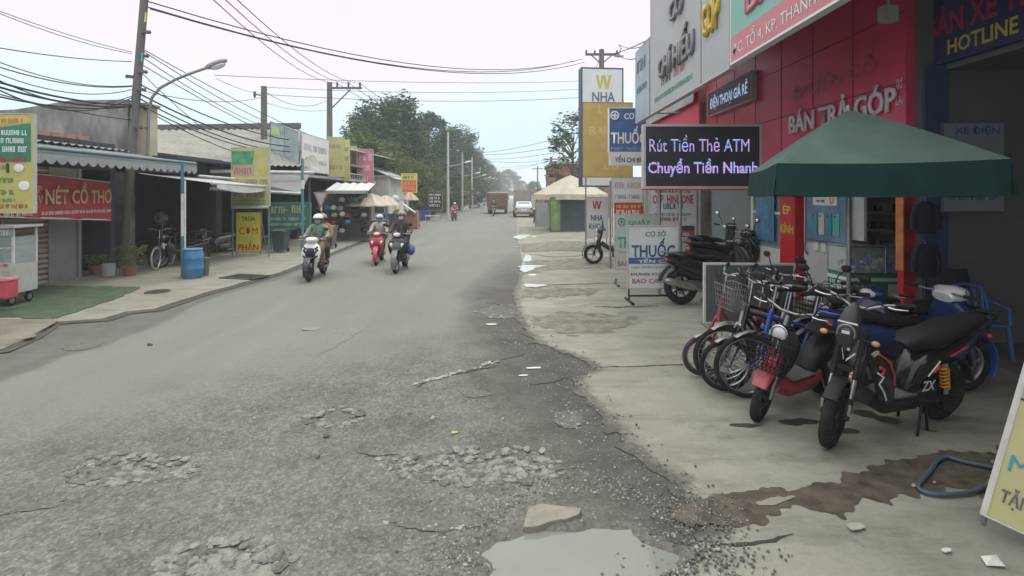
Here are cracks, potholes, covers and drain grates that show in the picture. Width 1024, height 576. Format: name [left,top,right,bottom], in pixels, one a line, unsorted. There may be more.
crack [417,354,523,387]
pothole [300,405,366,429]
crack [317,327,367,356]
pothole [57,451,206,487]
pothole [375,445,568,488]
pothole [151,533,301,576]
pothole [445,513,697,576]
